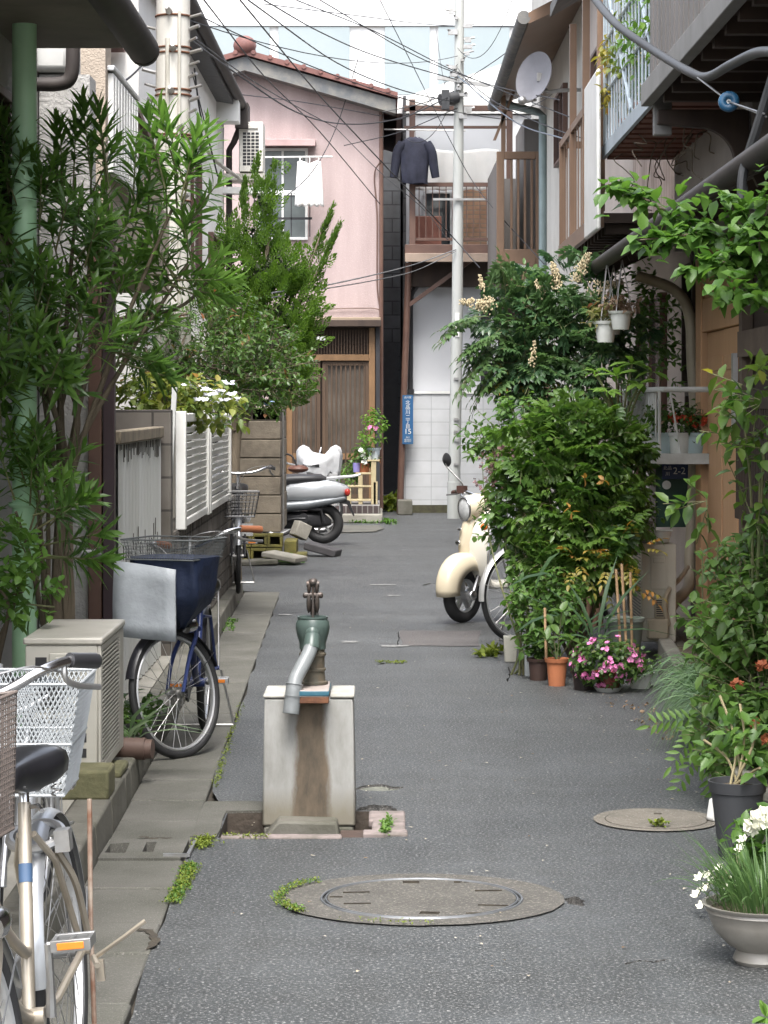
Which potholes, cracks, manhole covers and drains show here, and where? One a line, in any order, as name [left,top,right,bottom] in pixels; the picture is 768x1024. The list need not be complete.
pothole [565,896,585,906]
manhole cover [278,873,565,925]
manhole cover [593,808,715,831]
